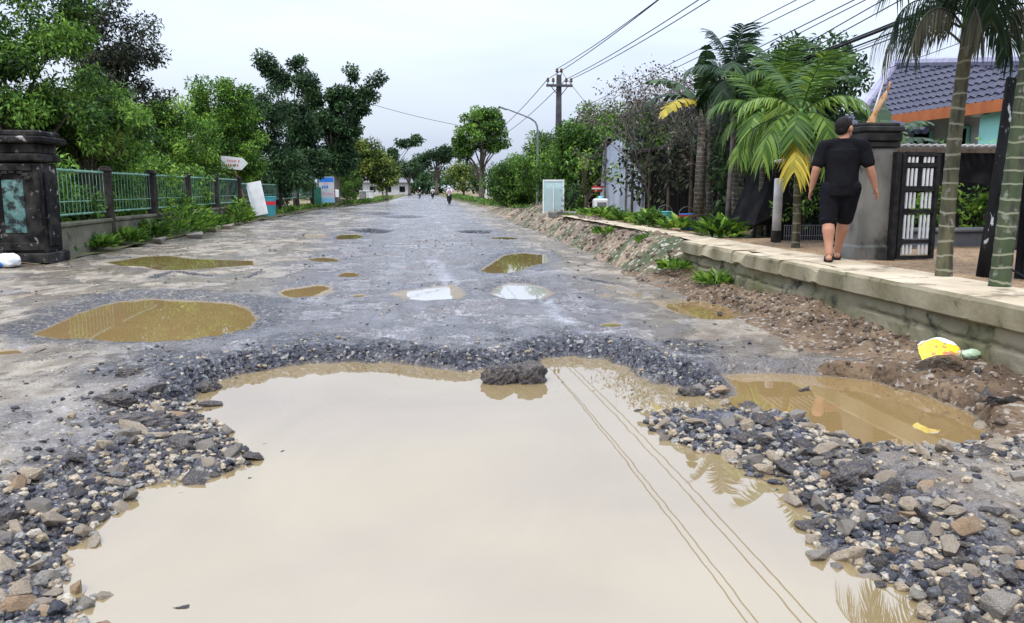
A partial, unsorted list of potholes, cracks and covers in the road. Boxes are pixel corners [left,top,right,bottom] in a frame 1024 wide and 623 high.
pothole [75,253,282,273]
pothole [0,334,1024,623]
pothole [316,232,387,241]
pothole [372,281,483,302]
pothole [476,278,575,303]
pothole [457,250,570,276]
pothole [0,287,302,348]
pothole [630,294,745,323]
